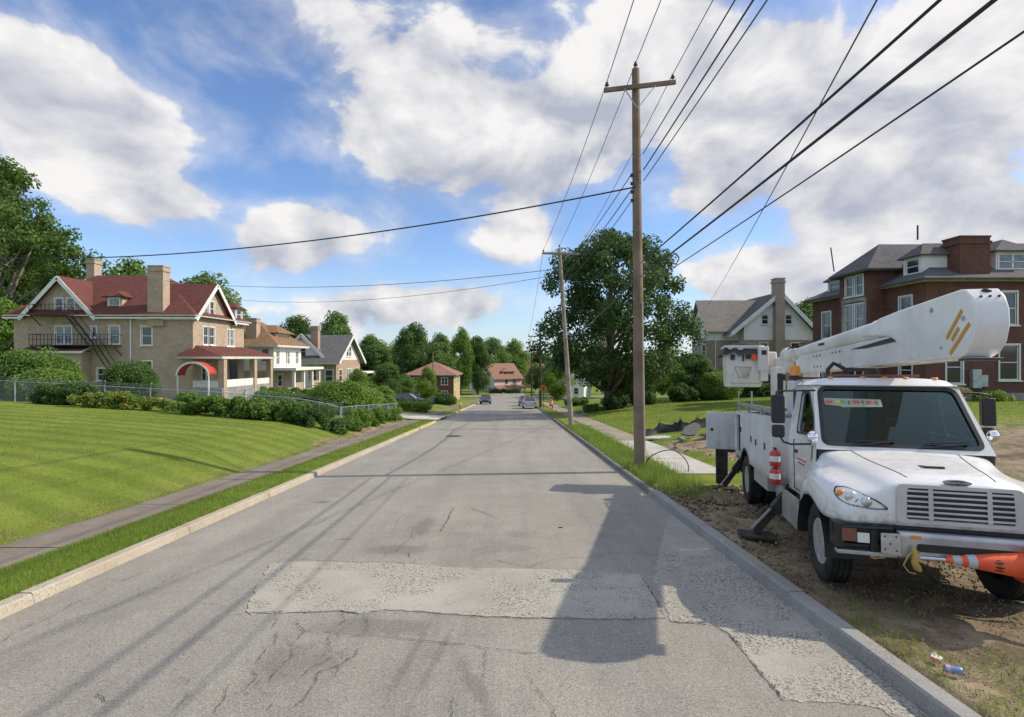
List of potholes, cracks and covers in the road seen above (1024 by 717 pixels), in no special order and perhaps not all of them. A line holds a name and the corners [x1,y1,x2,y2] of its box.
crack [213,610,652,714]
